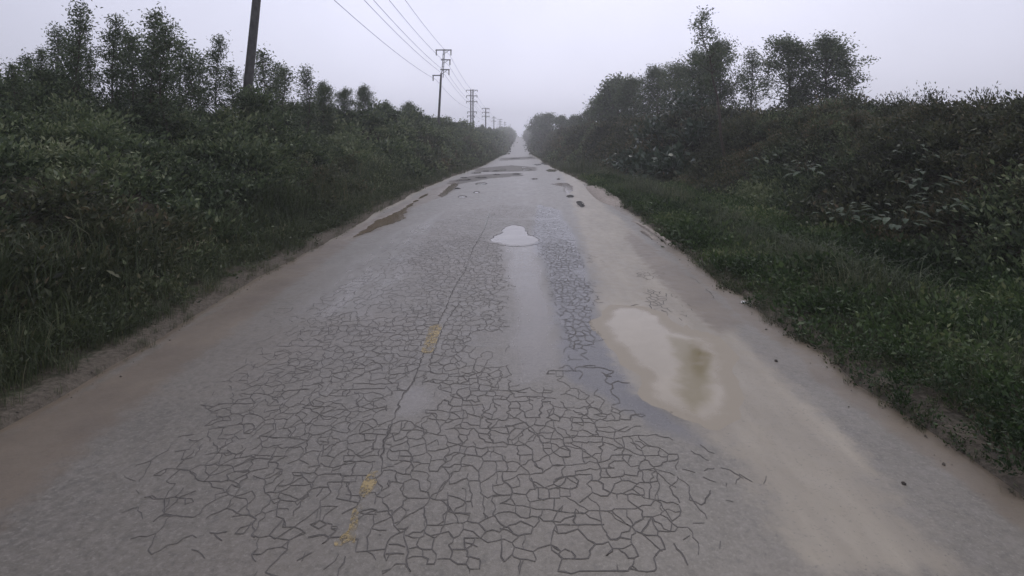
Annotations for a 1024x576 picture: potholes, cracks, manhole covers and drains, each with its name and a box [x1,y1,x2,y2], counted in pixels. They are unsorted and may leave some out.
pothole [485,224,543,247]
pothole [438,183,458,197]
crack [122,205,766,576]
